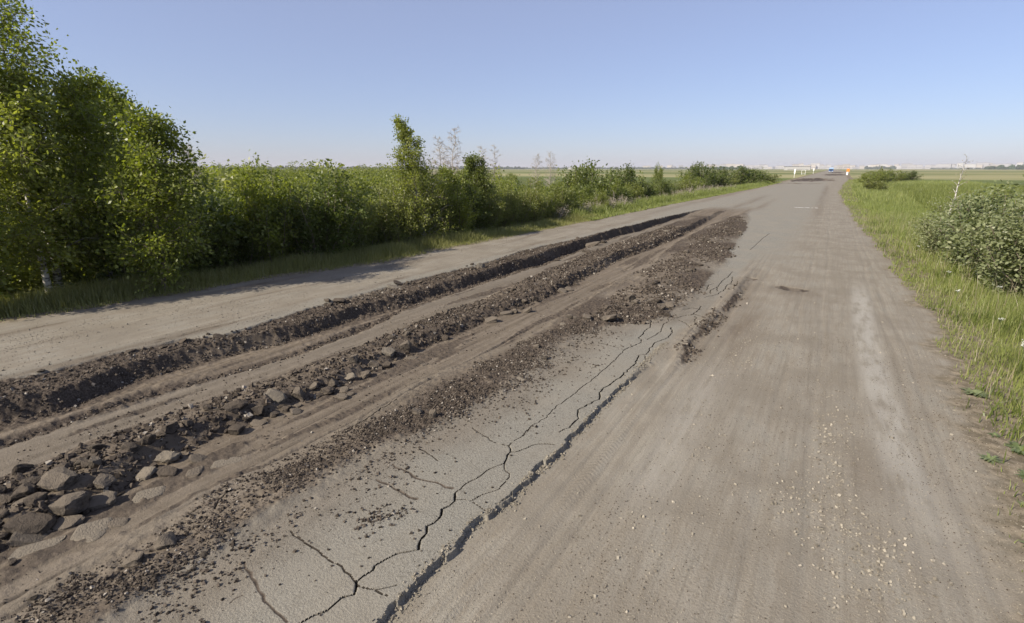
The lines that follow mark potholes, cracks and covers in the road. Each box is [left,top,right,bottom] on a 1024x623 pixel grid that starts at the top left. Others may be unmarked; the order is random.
crack [230,272,738,623]
pothole [765,284,816,295]
pothole [0,208,757,623]
